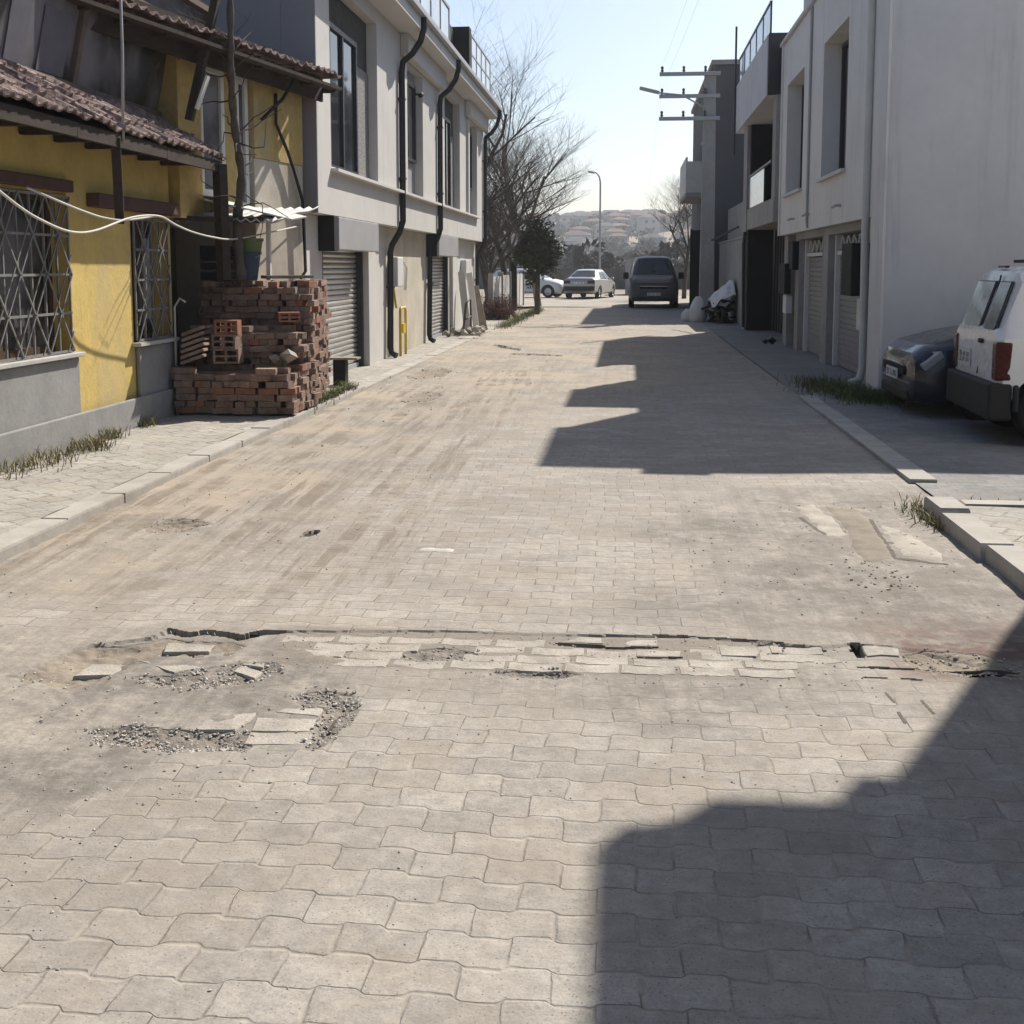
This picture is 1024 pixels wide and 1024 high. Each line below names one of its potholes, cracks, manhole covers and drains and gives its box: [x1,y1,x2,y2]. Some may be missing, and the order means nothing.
pothole [85,722,255,754]
pothole [490,666,585,680]
pothole [141,518,210,533]
pothole [125,660,284,690]
pothole [399,646,481,662]
pothole [19,635,245,689]
crack [871,668,1019,677]
pothole [285,688,362,751]
pothole [902,647,1024,681]
